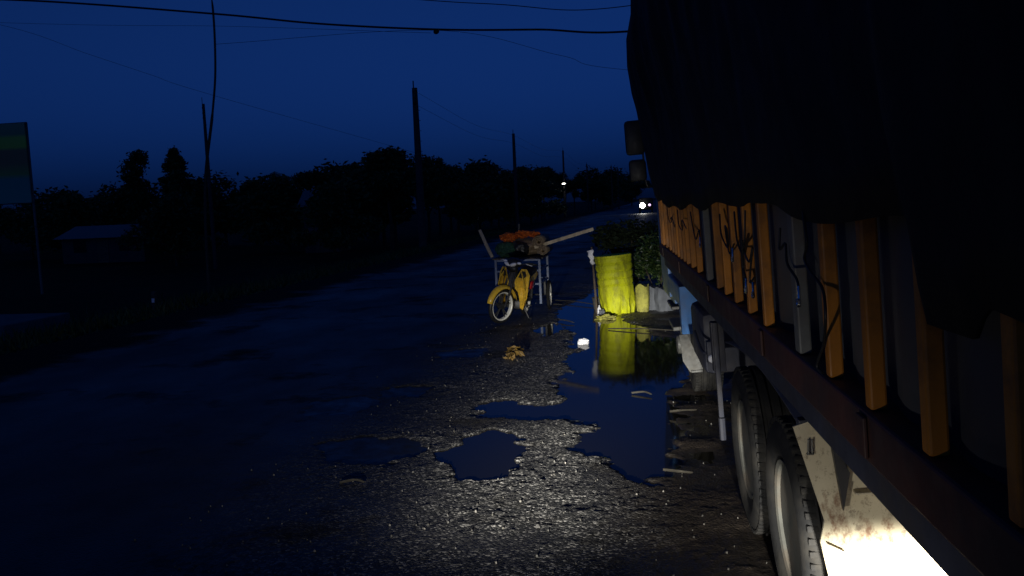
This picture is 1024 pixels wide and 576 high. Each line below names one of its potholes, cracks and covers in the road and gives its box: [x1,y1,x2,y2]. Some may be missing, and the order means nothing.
pothole [528,322,569,337]
pothole [430,427,538,482]
pothole [422,345,495,361]
pothole [307,433,434,469]
